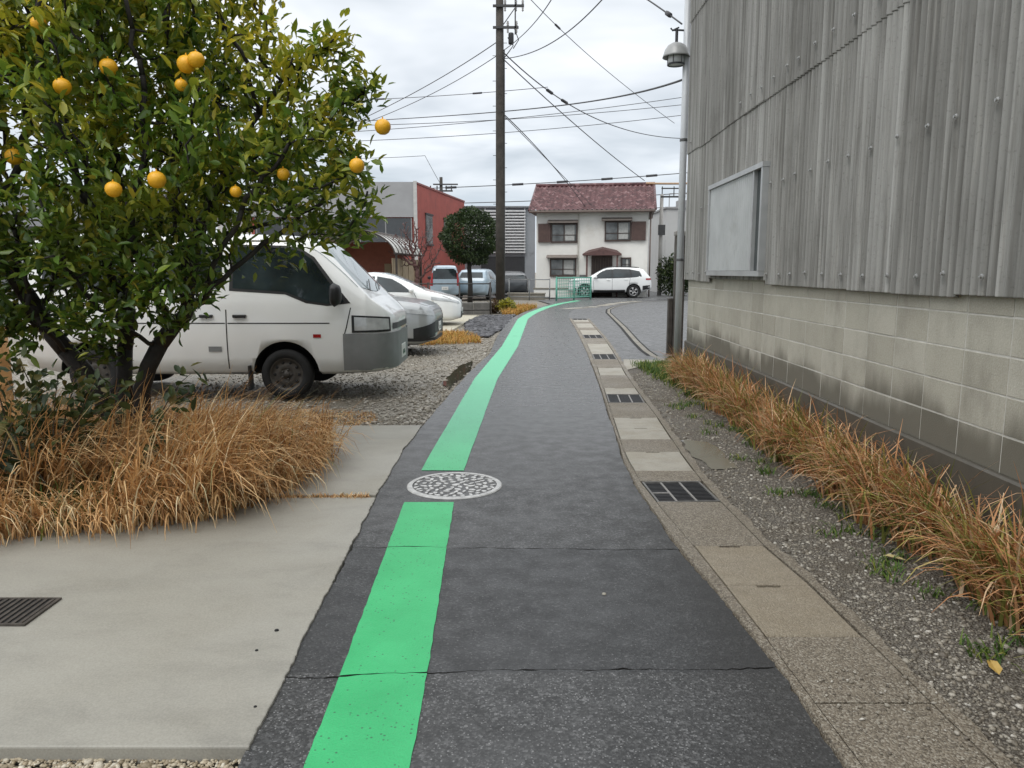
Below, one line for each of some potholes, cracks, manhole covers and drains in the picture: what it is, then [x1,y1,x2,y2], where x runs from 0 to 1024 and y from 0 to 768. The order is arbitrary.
manhole cover [407,472,502,500]
drain grate [0,597,62,626]
drain grate [606,394,645,403]
crack [286,667,774,679]
drain grate [642,481,720,502]
